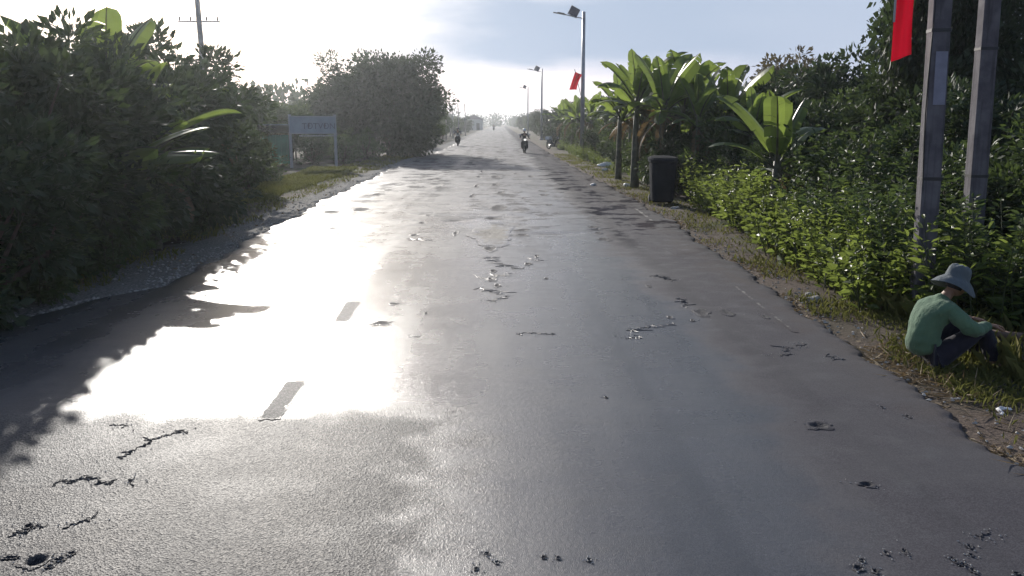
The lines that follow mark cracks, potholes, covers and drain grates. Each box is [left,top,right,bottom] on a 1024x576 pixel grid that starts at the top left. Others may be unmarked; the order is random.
crack [52,424,188,487]
pothole [15,550,55,570]
crack [8,511,98,537]
pothole [804,419,834,430]
crack [626,298,696,339]
